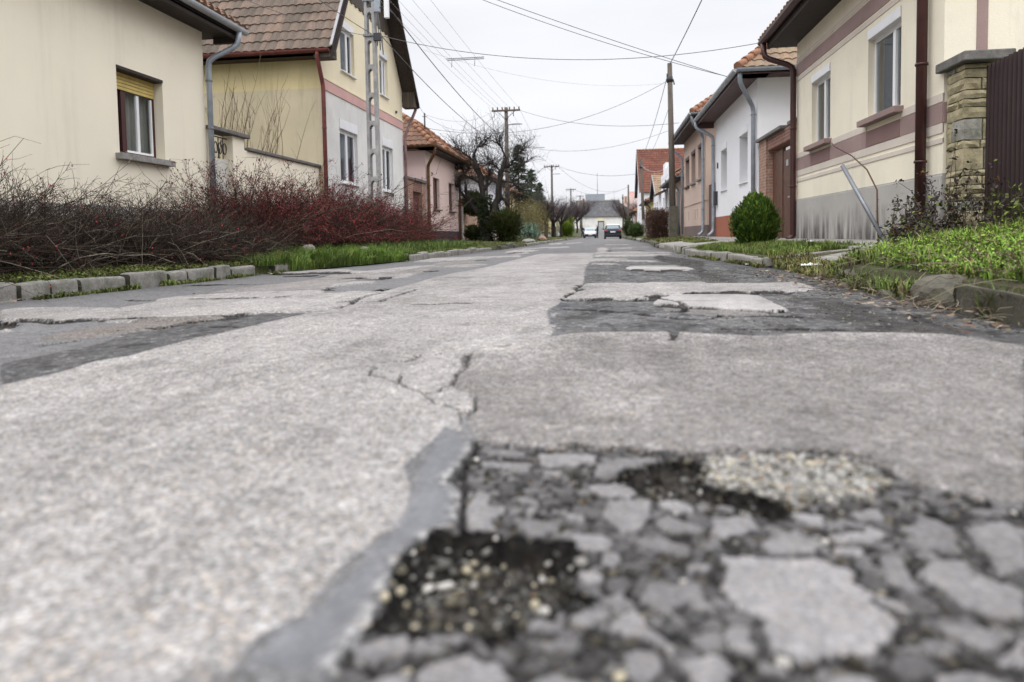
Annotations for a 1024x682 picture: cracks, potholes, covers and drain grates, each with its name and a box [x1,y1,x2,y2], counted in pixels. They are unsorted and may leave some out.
pothole [362,526,601,649]
crack [10,271,392,346]
crack [340,352,1024,682]
pothole [607,457,799,522]
